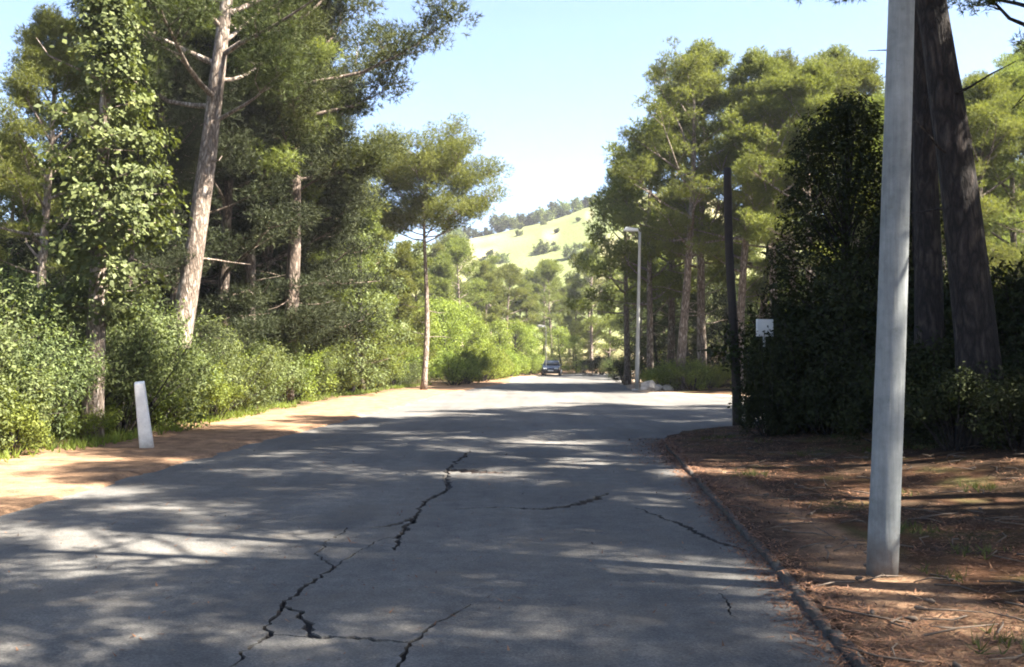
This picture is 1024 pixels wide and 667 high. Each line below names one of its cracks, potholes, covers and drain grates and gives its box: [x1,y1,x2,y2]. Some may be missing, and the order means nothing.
crack [645,511,741,550]
crack [239,451,503,667]
crack [523,494,608,510]
